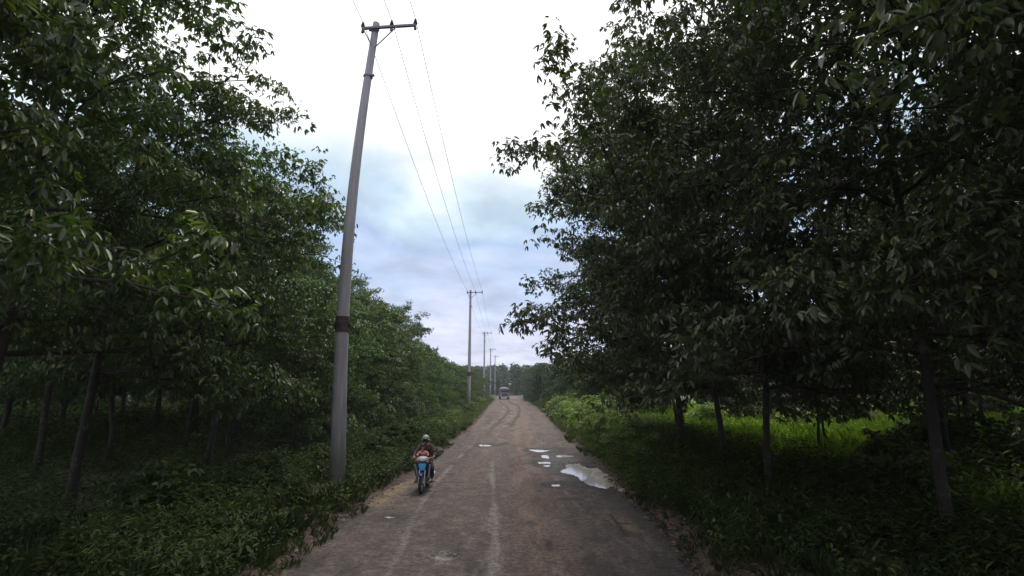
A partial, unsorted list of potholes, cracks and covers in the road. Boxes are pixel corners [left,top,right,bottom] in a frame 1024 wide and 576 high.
pothole [557,463,629,493]
